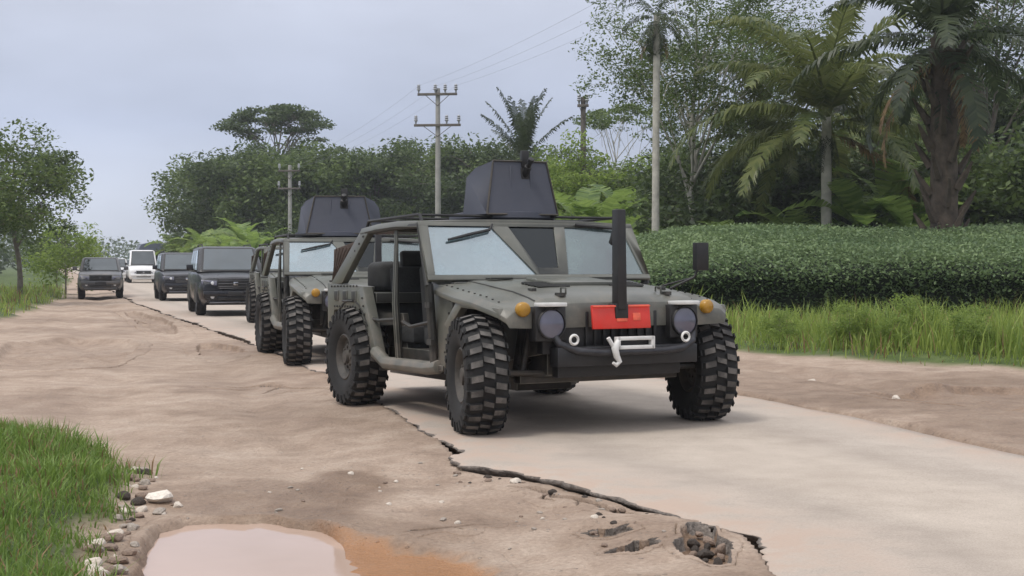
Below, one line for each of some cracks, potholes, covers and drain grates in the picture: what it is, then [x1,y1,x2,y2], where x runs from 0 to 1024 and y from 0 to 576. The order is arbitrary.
pothole [662,520,744,568]
pothole [593,535,670,556]
pothole [112,512,522,576]
pothole [572,520,645,540]
crack [386,483,661,537]
